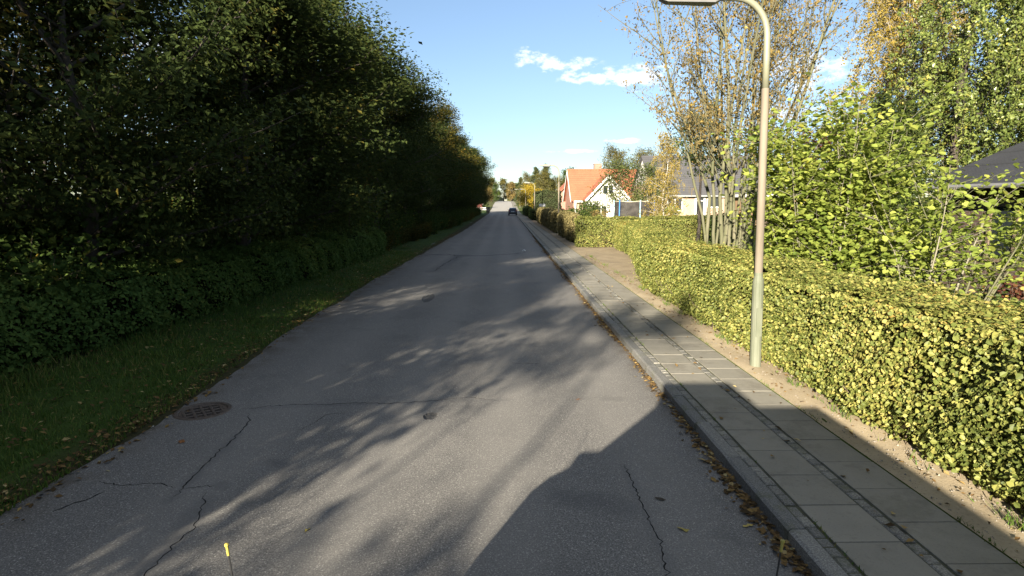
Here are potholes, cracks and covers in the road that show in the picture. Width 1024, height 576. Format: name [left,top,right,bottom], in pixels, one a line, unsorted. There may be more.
crack [54,397,499,576]
manhole cover [172,402,232,420]
crack [626,468,671,576]
